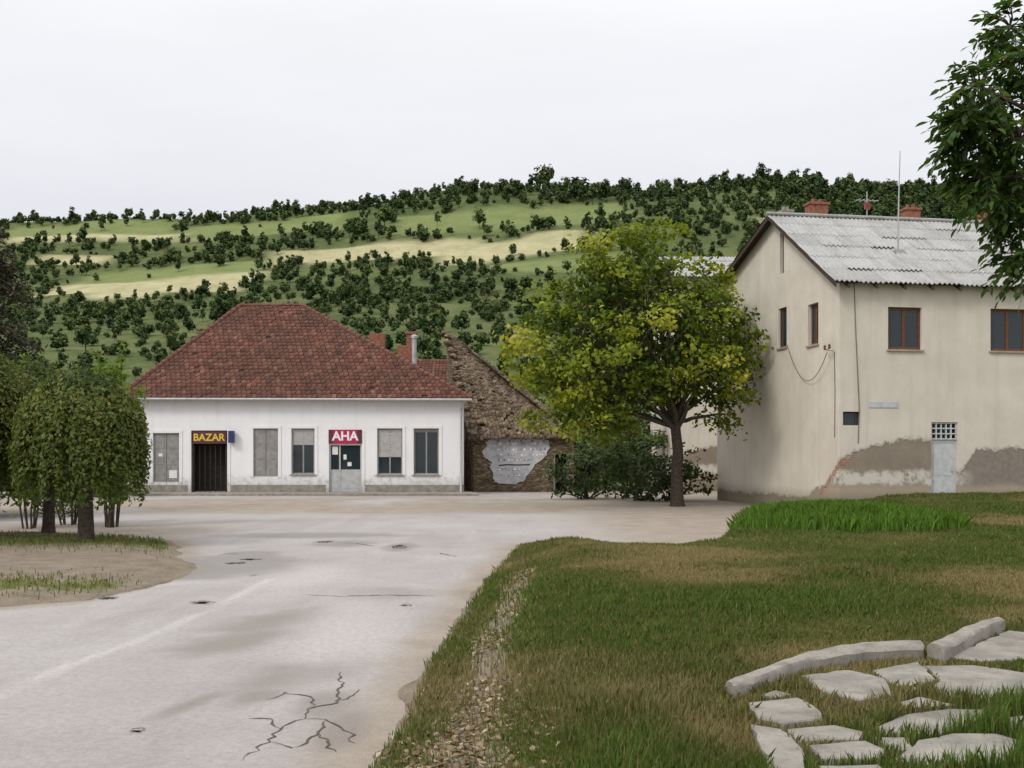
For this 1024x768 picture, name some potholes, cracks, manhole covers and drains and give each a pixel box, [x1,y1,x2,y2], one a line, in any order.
crack [243,672,359,758]
